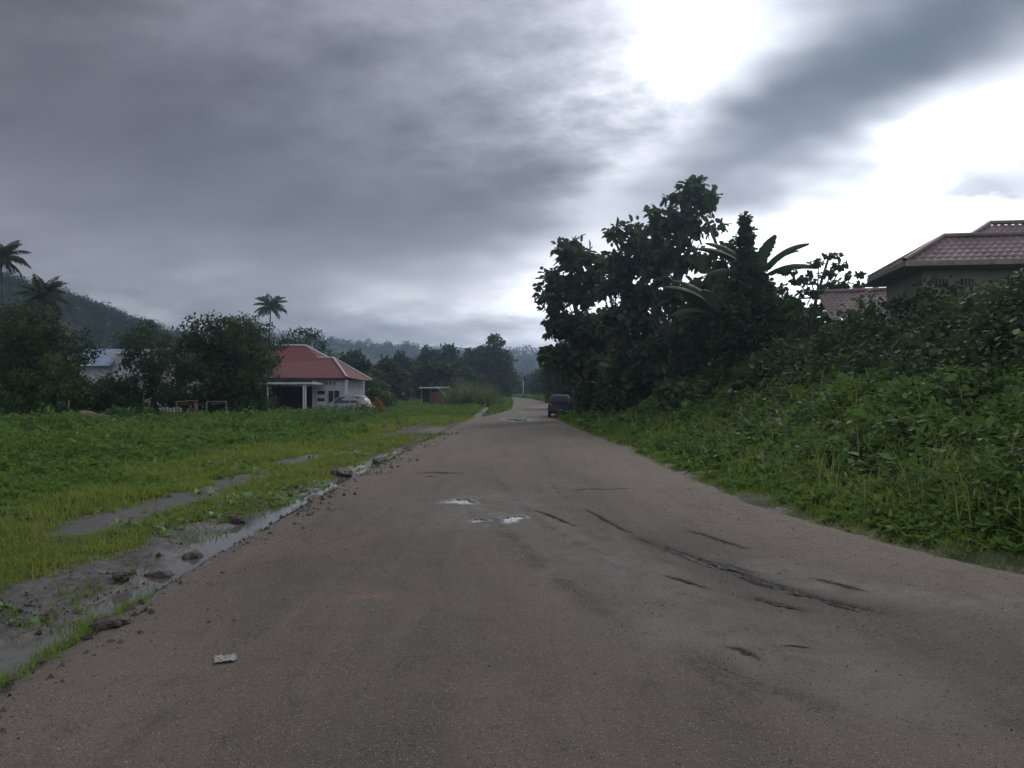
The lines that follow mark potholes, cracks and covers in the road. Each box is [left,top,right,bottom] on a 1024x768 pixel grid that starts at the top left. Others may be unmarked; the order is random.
pothole [496,514,530,525]
pothole [434,498,481,506]
crack [534,510,628,532]
